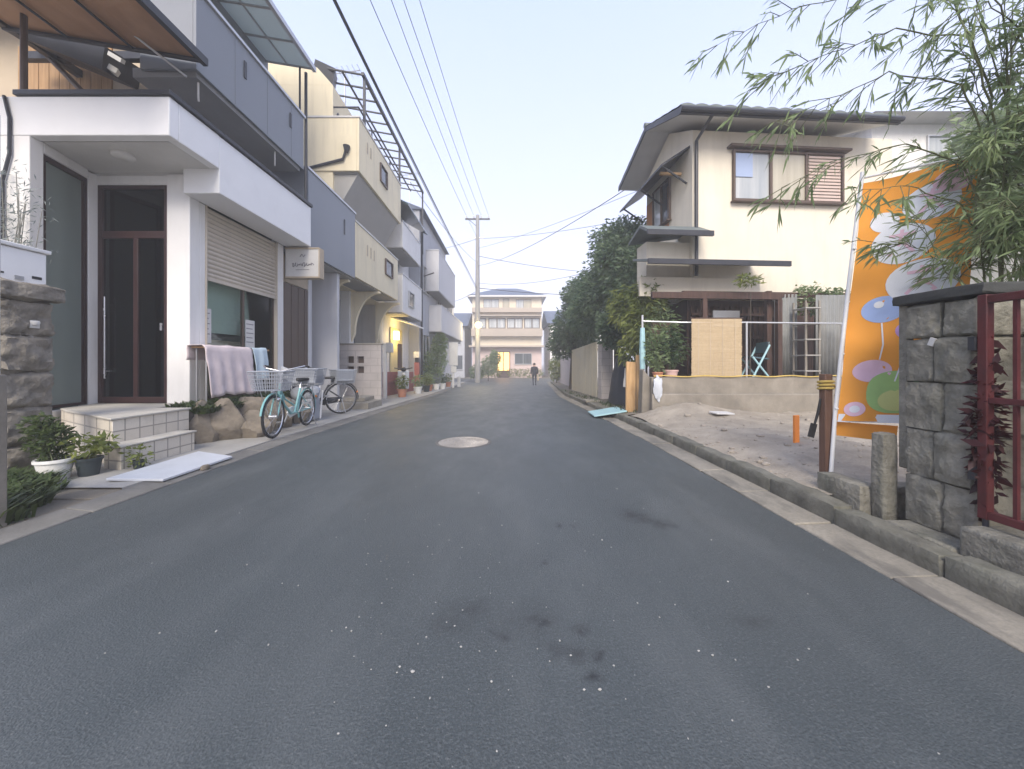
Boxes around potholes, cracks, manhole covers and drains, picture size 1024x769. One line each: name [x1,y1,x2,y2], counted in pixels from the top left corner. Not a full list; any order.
manhole cover [435,436,491,449]
